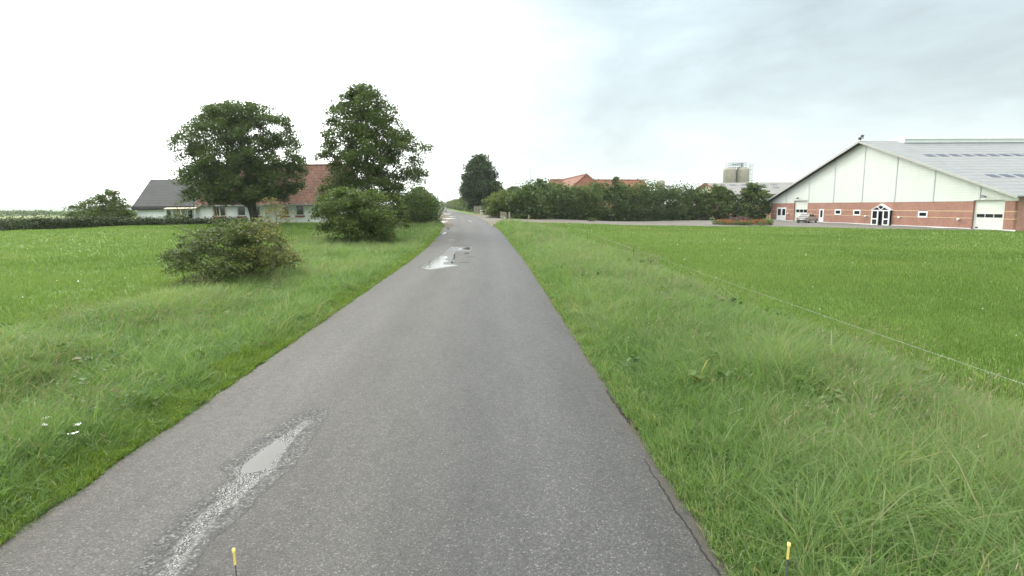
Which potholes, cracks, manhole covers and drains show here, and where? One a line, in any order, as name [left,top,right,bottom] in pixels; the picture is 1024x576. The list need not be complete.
pothole [121,407,329,576]
pothole [417,246,472,270]
crack [606,390,631,424]
crack [644,459,722,576]
